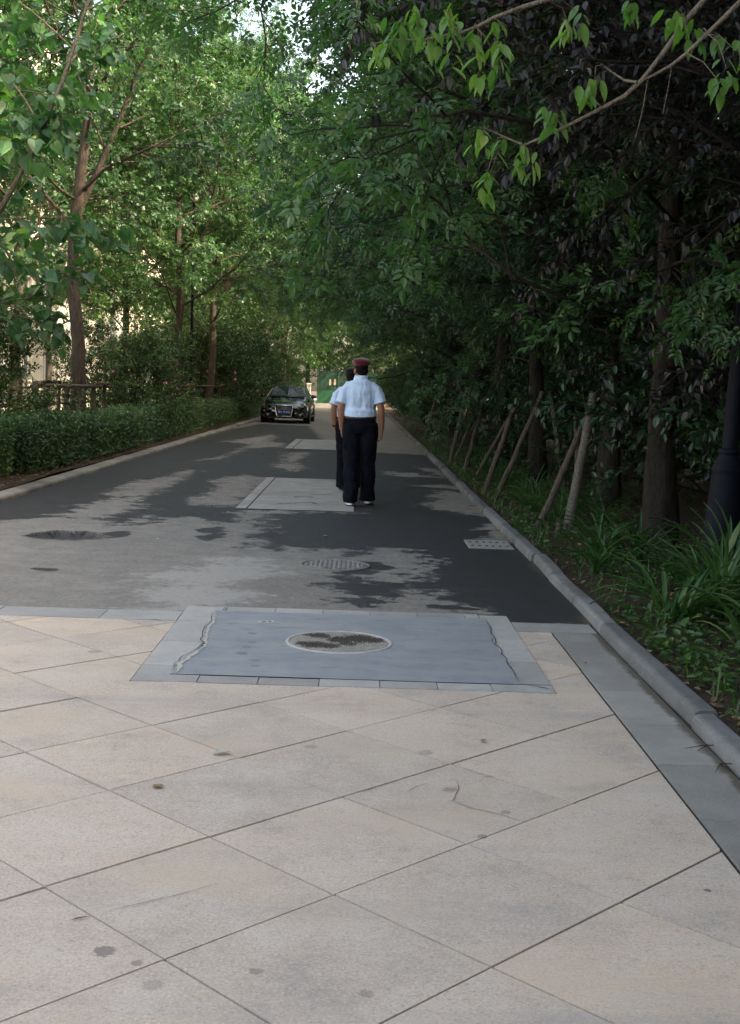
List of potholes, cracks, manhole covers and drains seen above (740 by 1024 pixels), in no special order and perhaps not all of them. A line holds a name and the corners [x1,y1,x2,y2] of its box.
manhole cover [300,559,370,571]
manhole cover [286,631,392,654]
crack [487,622,549,689]
crack [173,612,216,672]
pothole [20,530,114,541]
